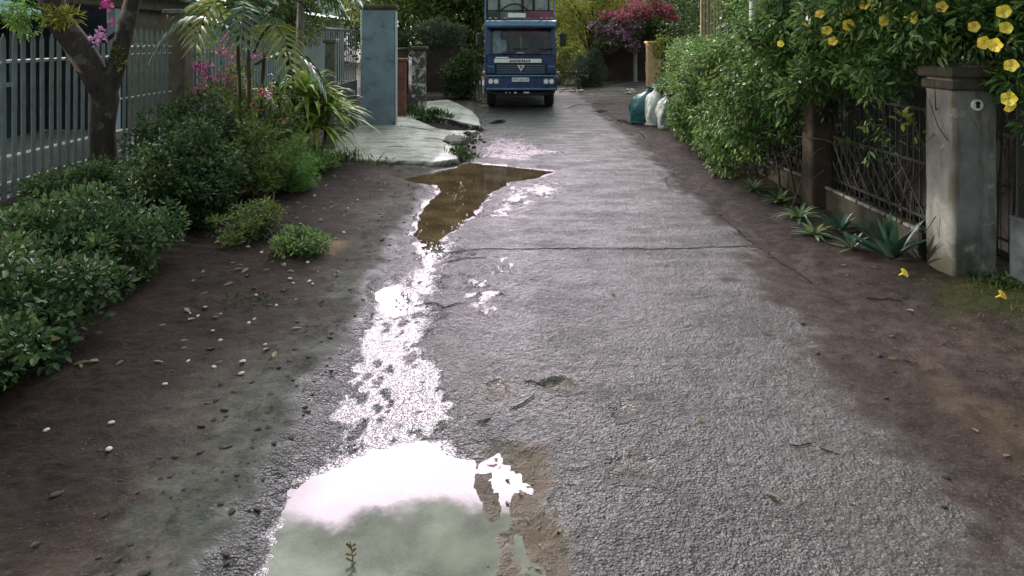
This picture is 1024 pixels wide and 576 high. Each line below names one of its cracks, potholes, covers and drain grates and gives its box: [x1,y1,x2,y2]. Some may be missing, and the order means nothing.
pothole [532,373,587,396]
crack [446,201,812,283]
